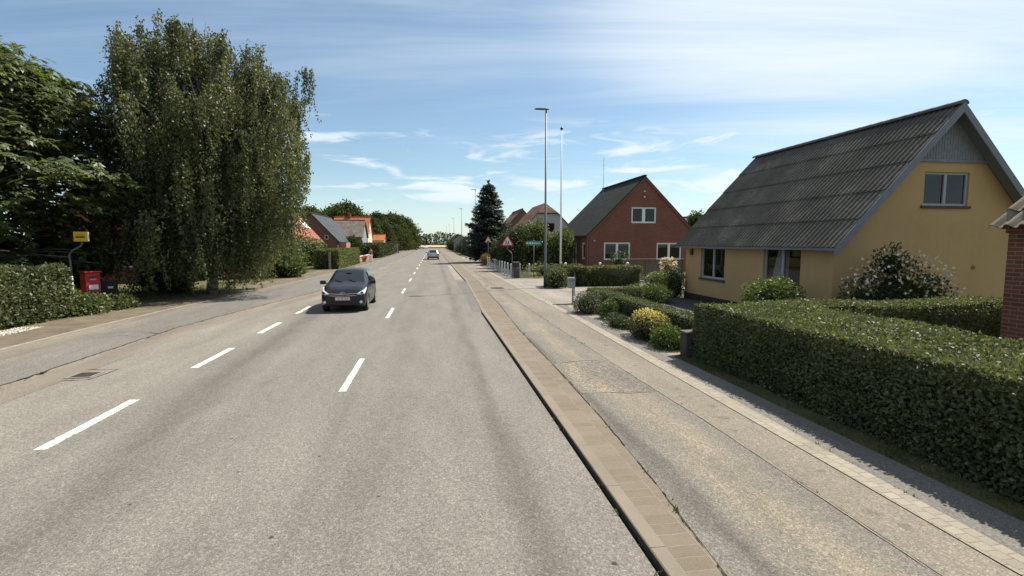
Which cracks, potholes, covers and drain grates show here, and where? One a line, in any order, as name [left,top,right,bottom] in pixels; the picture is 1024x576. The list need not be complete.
drain grate [63,371,106,379]
